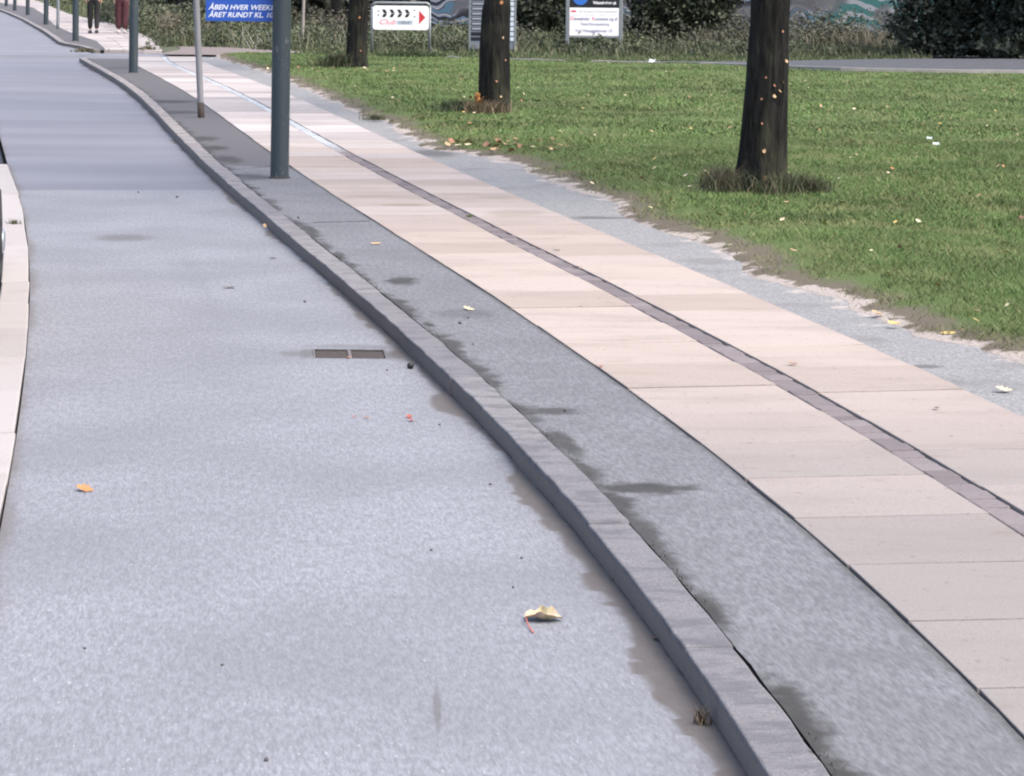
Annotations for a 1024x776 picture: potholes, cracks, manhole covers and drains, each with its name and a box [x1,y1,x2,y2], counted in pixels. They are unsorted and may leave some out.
drain grate [312,349,388,359]
